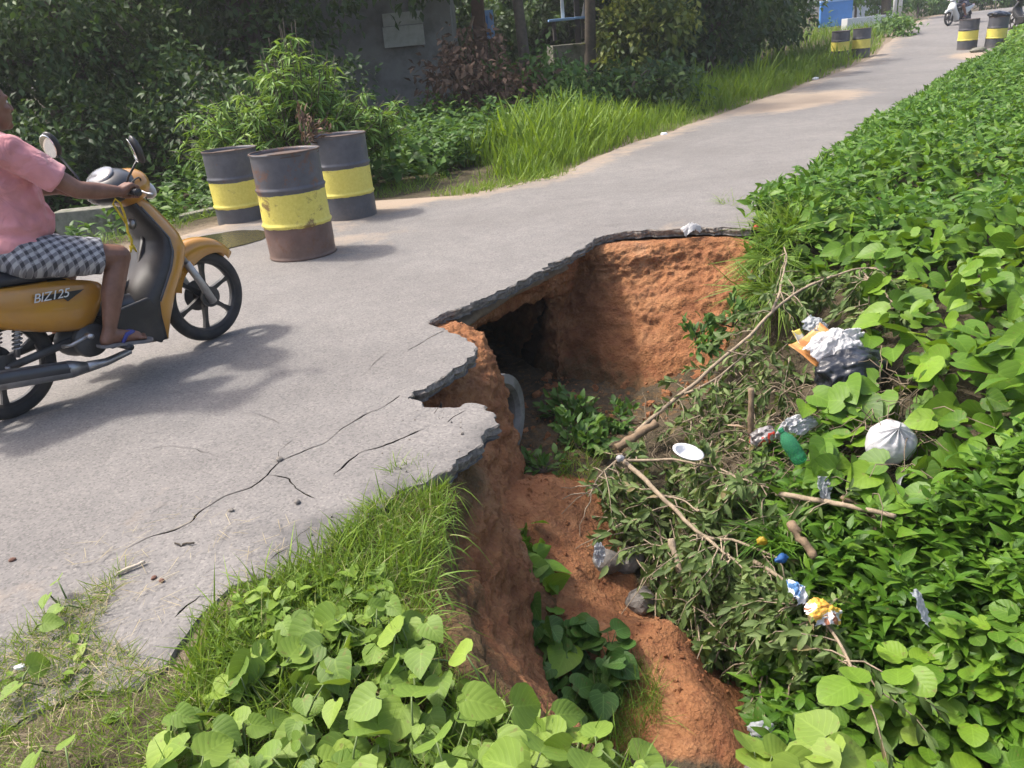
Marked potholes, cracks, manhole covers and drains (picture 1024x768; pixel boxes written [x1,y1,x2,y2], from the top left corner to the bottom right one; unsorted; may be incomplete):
pothole [369,227,762,768]
crack [159,398,409,535]
